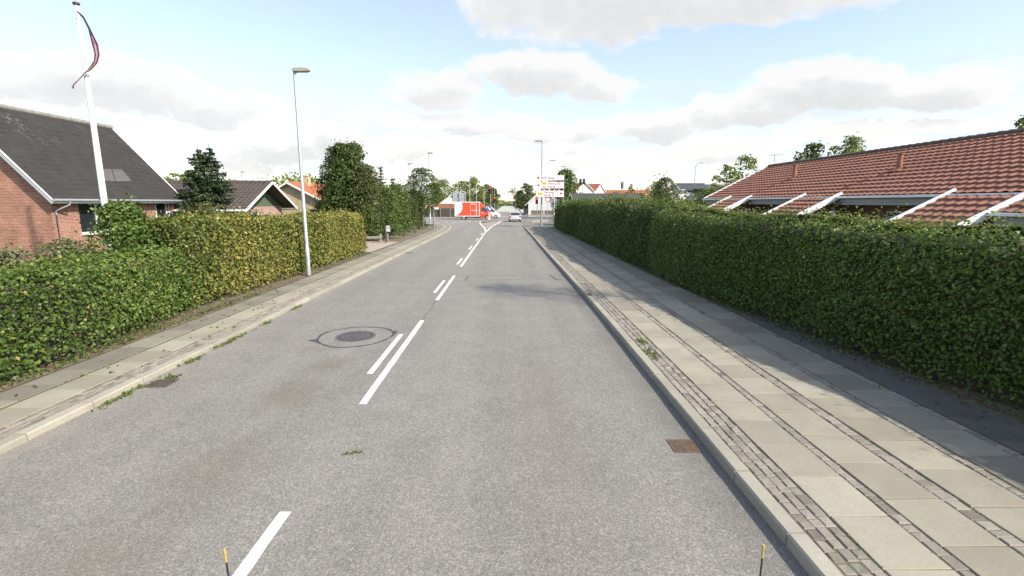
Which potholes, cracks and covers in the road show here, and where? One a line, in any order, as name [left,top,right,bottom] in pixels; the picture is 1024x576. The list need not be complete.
manhole cover [335,331,376,341]
drain grate [666,439,703,453]
